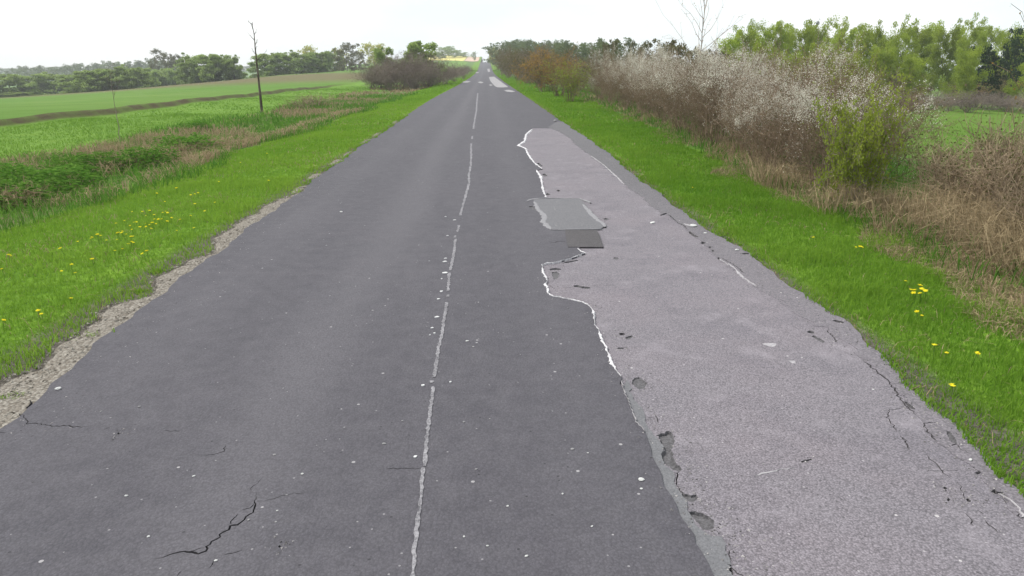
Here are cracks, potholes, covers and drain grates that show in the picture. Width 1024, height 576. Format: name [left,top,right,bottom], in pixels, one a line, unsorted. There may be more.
crack [0,400,85,433]
pothole [656,431,682,471]
pothole [632,377,647,390]
pothole [689,511,714,530]
crack [162,480,304,574]
crack [886,407,1021,533]
